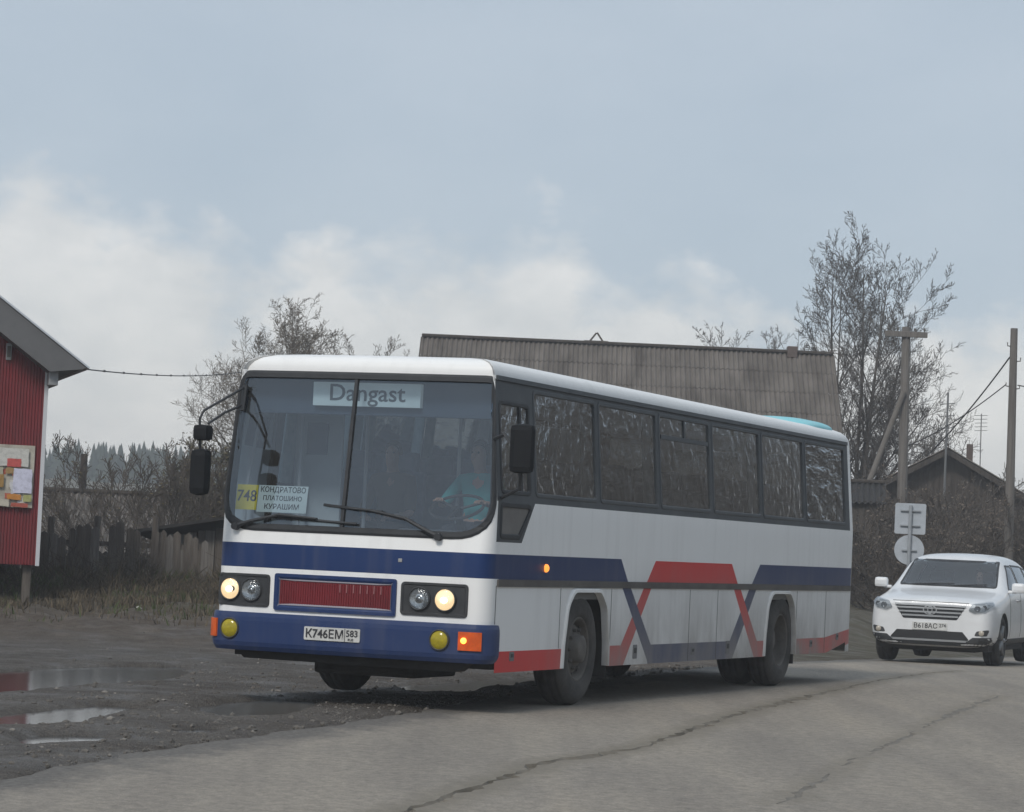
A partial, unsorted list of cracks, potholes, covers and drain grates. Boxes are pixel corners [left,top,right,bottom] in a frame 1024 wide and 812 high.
crack [402,671,998,812]
